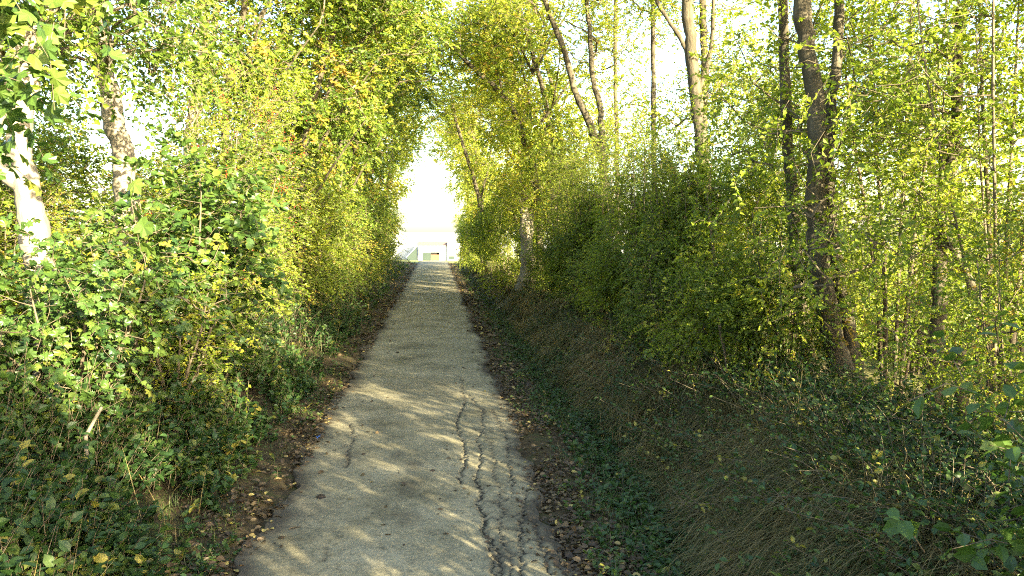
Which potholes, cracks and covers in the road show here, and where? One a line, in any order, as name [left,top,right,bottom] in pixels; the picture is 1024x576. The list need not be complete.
crack [456,378,563,576]
